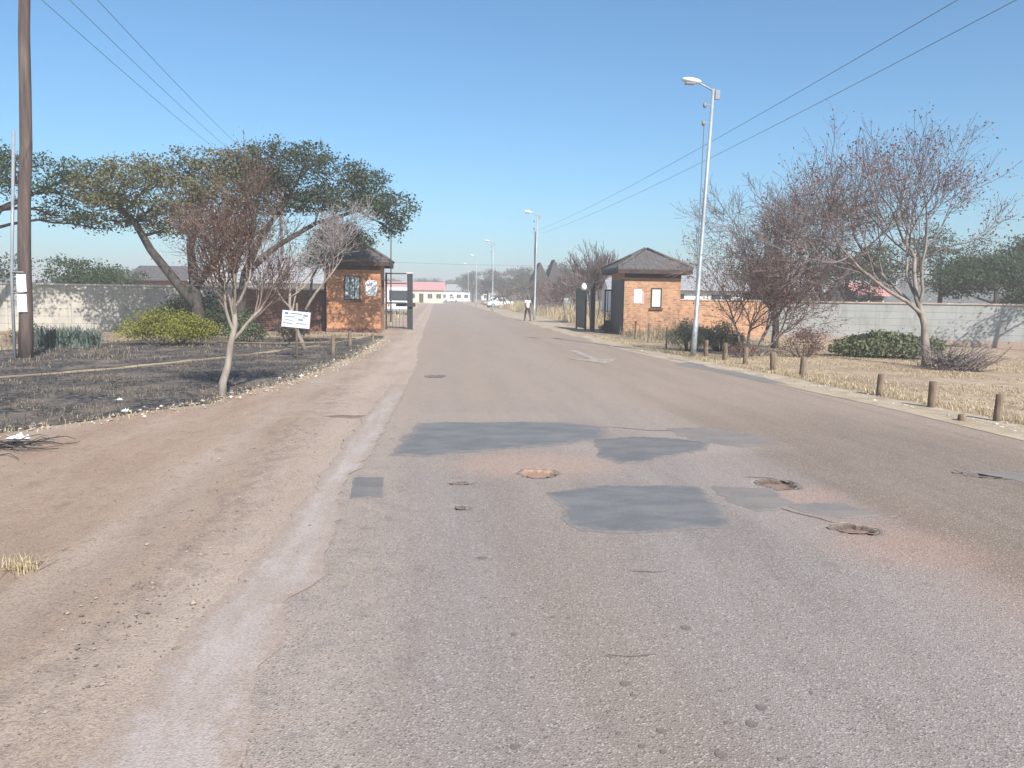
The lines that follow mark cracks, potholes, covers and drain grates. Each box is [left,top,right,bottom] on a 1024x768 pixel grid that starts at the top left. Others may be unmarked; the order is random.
pothole [754,478,801,491]
pothole [826,523,879,535]
pothole [950,471,1007,479]
